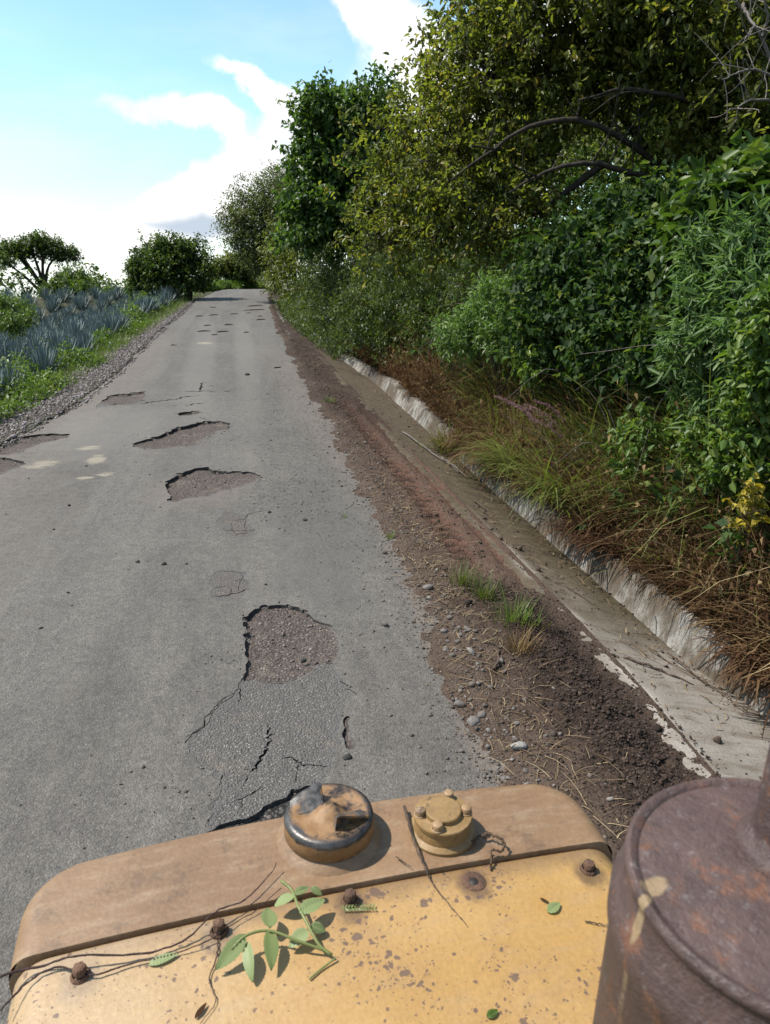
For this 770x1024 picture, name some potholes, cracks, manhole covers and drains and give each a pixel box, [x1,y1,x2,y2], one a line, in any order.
crack [190,689,241,735]
pothole [0,433,70,455]
pothole [165,467,262,502]
pothole [132,421,230,449]
crack [220,724,327,813]
pothole [0,457,26,475]
pothole [241,604,342,684]
